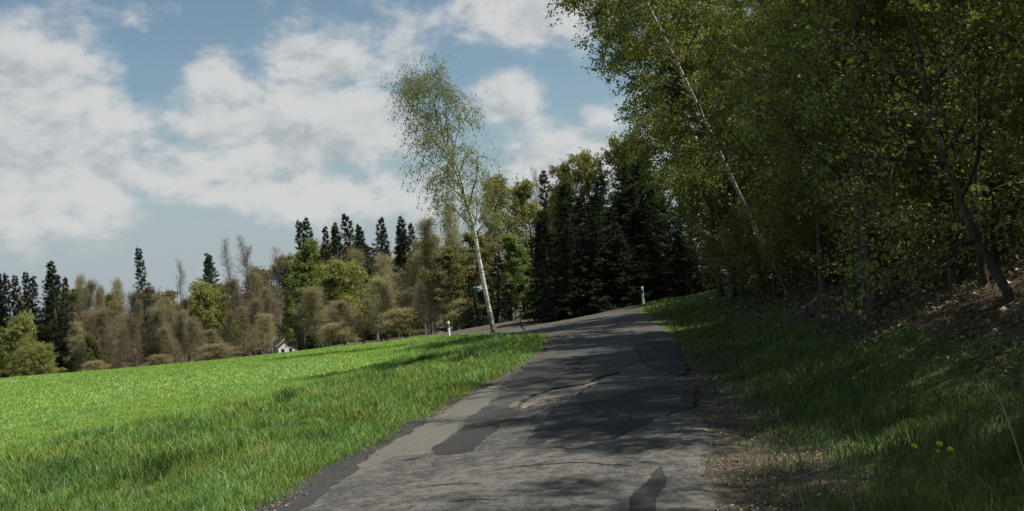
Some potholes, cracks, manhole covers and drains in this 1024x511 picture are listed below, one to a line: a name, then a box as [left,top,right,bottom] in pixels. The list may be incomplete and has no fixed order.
crack [500,445,632,481]
